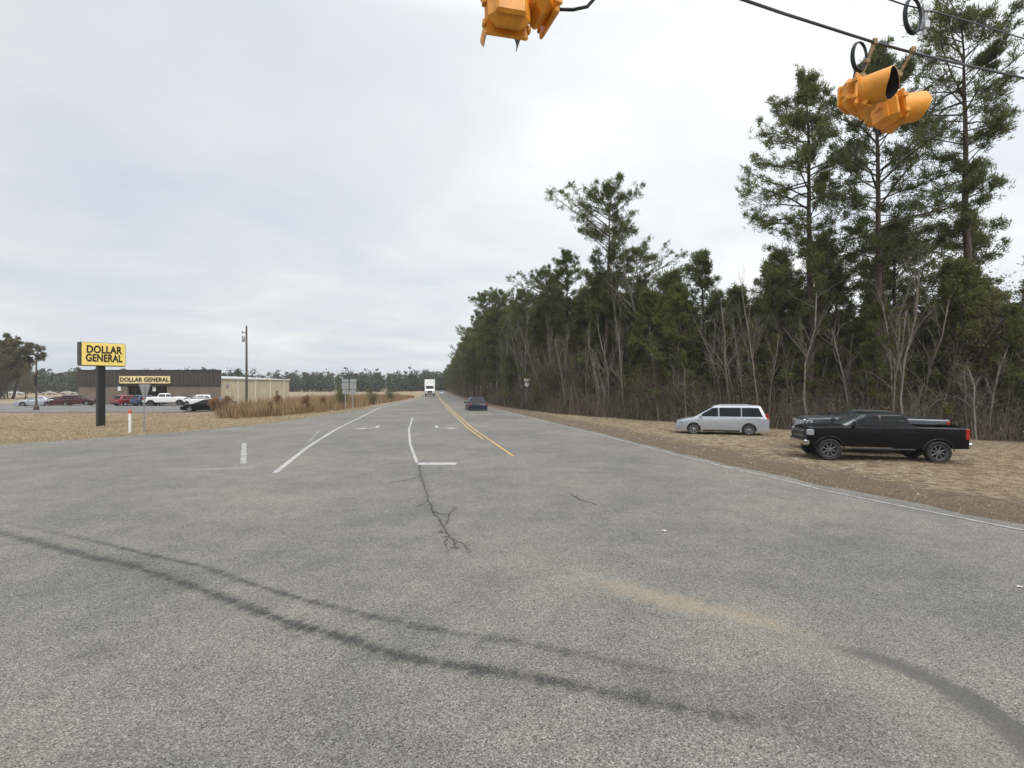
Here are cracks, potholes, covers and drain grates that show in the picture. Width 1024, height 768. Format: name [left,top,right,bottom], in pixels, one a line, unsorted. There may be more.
crack [390,465,469,550]
